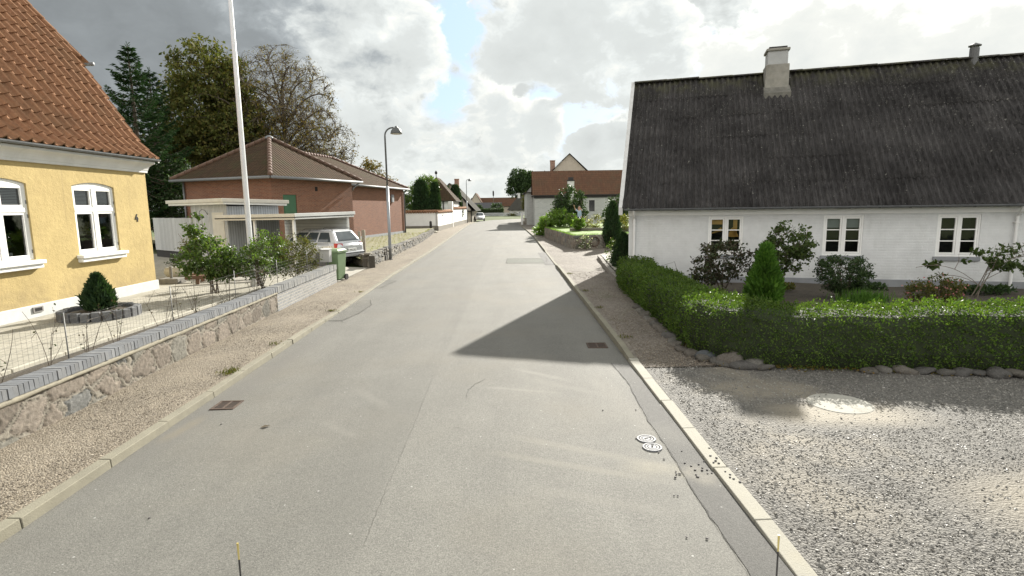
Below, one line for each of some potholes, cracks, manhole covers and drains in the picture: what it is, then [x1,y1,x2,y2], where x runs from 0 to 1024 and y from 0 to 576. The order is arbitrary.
manhole cover [637,434,656,443]
drain grate [209,400,244,410]
manhole cover [806,393,875,414]
manhole cover [642,443,662,452]
